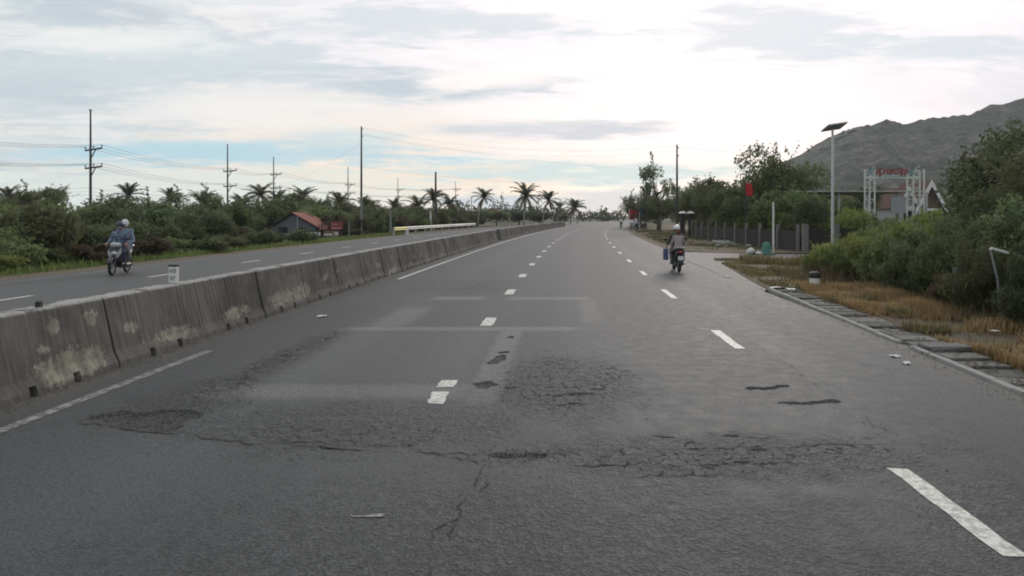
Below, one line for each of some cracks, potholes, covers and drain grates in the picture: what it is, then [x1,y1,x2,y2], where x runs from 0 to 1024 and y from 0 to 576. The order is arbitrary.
crack [81,422,492,576]
crack [501,350,641,410]
pothole [78,409,204,432]
pothole [486,355,507,365]
crack [558,434,890,477]
crack [173,332,337,402]
pothole [473,381,498,389]
